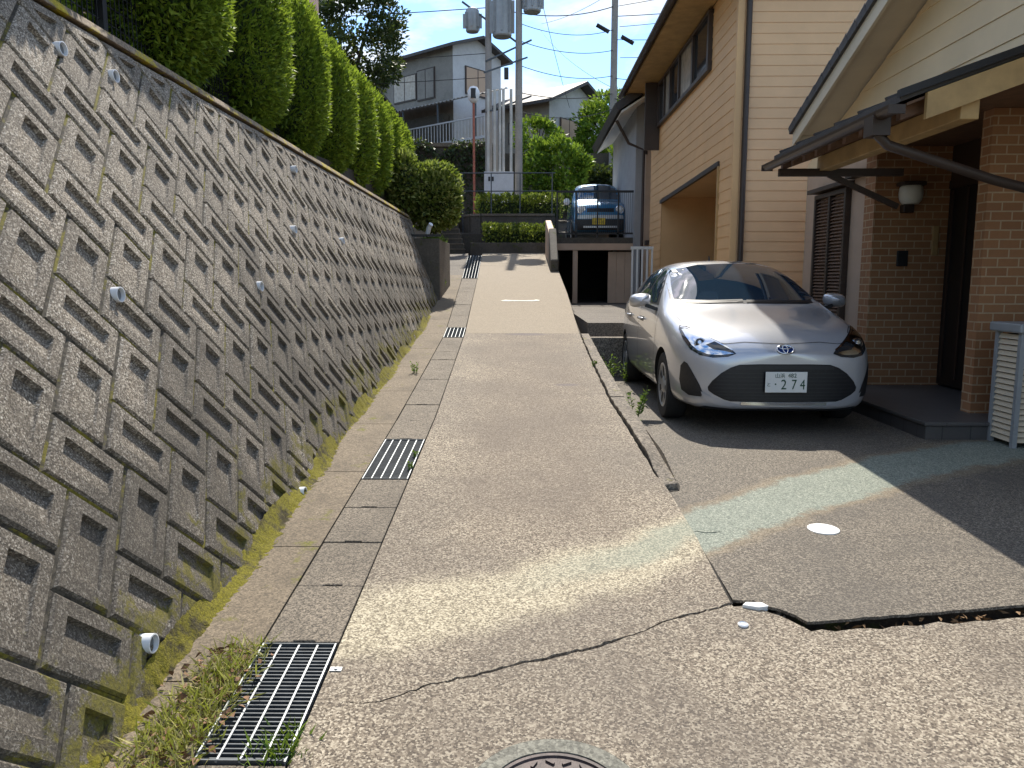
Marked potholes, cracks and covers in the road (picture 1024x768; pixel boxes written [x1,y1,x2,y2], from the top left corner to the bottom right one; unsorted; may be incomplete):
drain grate [195,643,337,768]
manhole cover [478,739,630,768]
drain grate [443,327,466,338]
drain grate [362,439,425,482]
drain grate [462,255,482,279]
